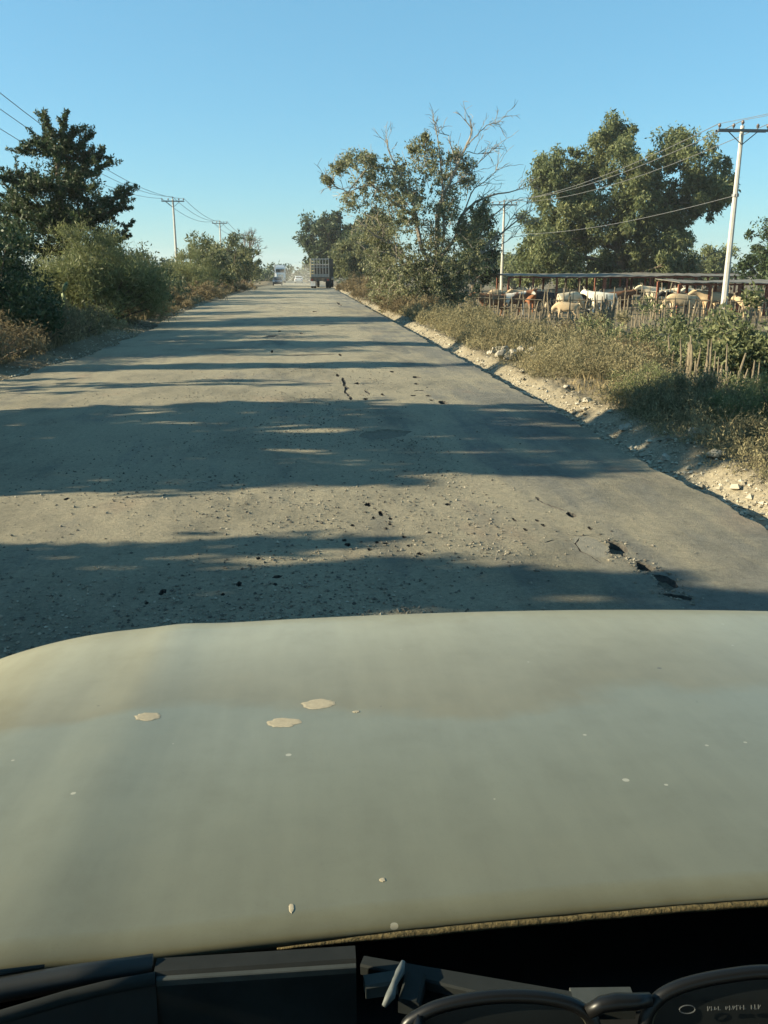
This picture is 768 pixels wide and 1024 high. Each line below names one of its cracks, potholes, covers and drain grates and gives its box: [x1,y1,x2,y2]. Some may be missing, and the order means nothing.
crack [341,377,370,400]
pothole [652,574,679,591]
pothole [606,540,628,557]
pothole [635,561,655,572]
crack [545,533,599,562]
